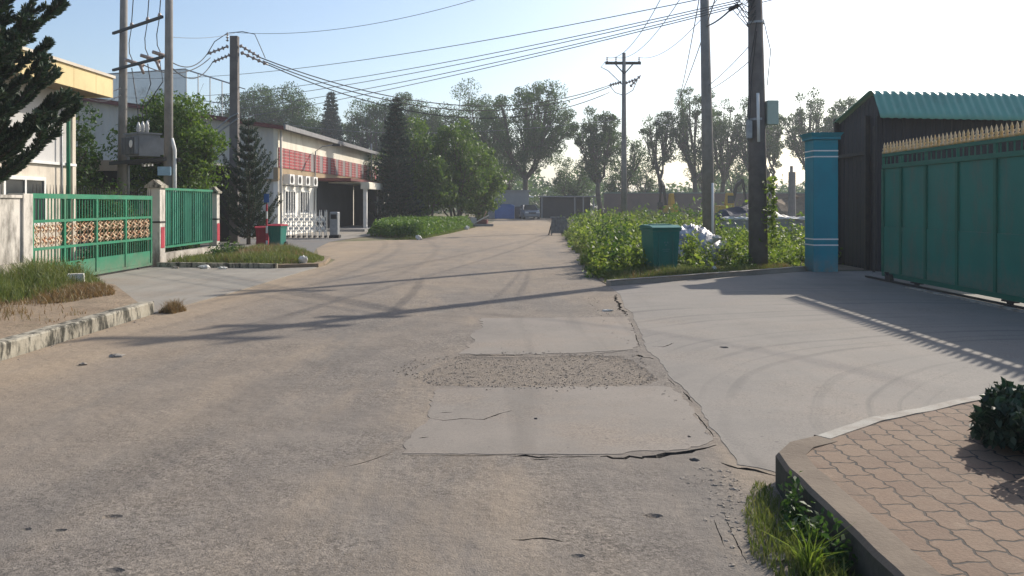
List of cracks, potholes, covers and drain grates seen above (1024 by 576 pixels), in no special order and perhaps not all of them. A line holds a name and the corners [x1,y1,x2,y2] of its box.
crack [613,294,672,359]
crack [714,514,747,562]
pothole [417,355,659,387]
crack [444,380,775,476]
